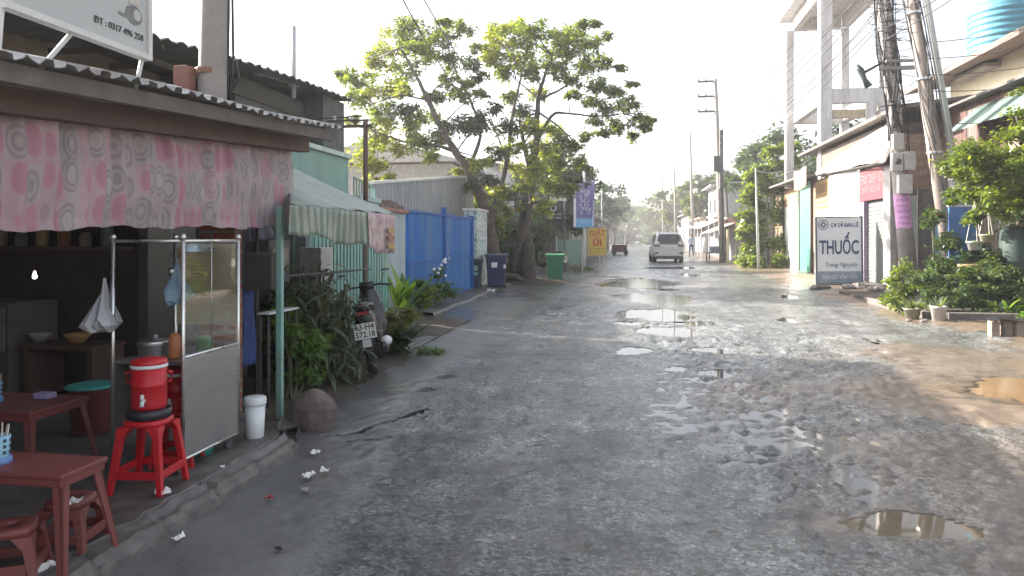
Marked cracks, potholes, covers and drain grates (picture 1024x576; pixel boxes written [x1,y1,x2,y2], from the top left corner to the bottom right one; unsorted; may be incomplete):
pothole [840,510,985,540]
crack [336,408,429,442]
pothole [968,377,1024,402]
pothole [635,327,707,337]
pothole [615,309,696,323]
pothole [615,347,654,355]
